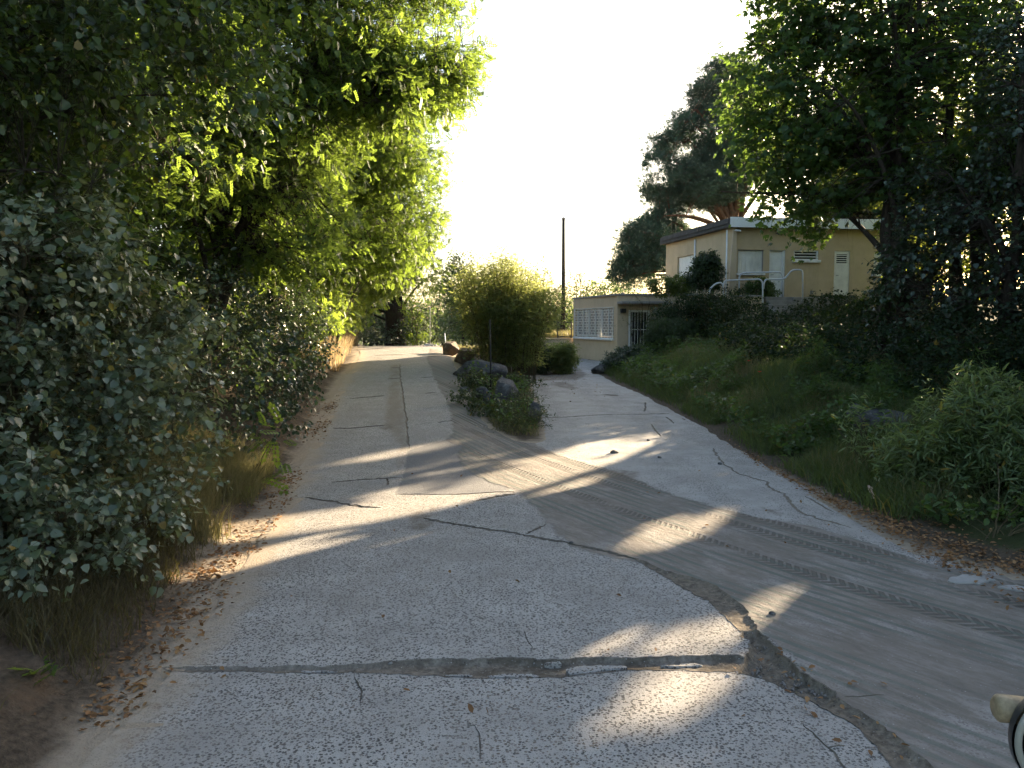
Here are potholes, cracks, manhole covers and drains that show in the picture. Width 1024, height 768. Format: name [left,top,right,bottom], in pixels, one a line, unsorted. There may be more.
crack [803,694,934,768]
crack [713,448,851,528]
